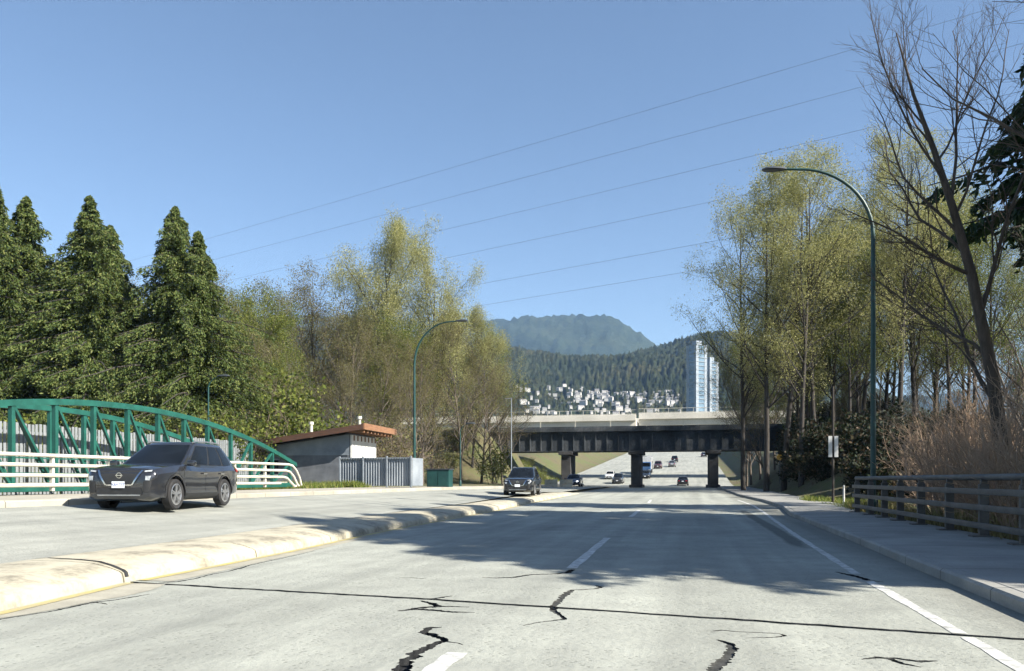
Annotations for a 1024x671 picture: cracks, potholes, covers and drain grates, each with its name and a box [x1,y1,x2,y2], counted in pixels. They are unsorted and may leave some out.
crack [837,572,880,582]
crack [391,596,475,671]
crack [862,657,934,667]
crack [482,569,603,626]
crack [706,630,787,671]
